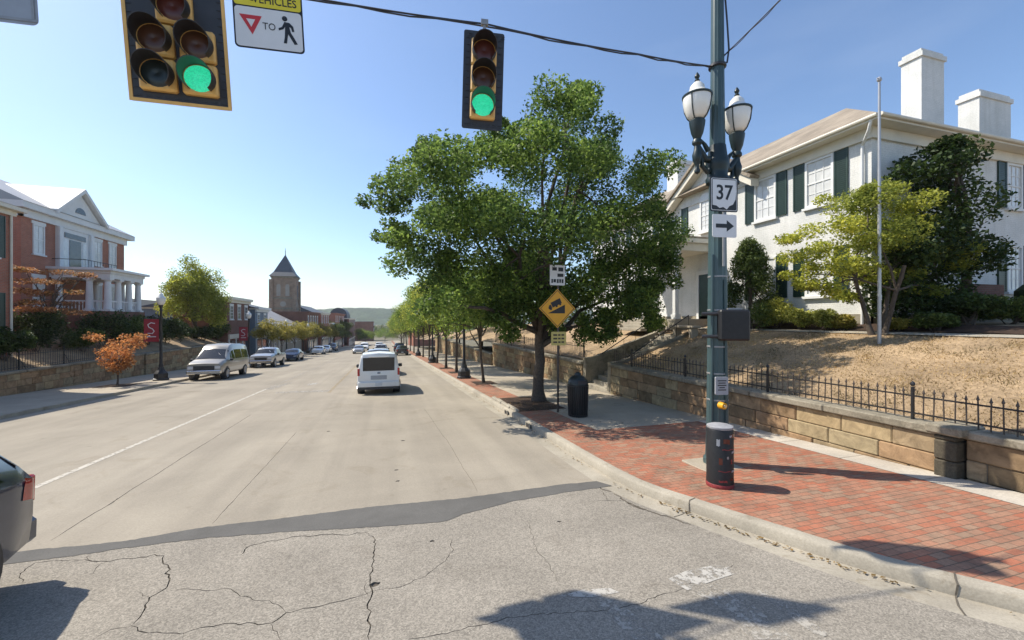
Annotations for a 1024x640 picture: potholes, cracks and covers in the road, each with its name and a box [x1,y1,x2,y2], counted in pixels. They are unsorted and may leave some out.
crack [19,532,454,640]
